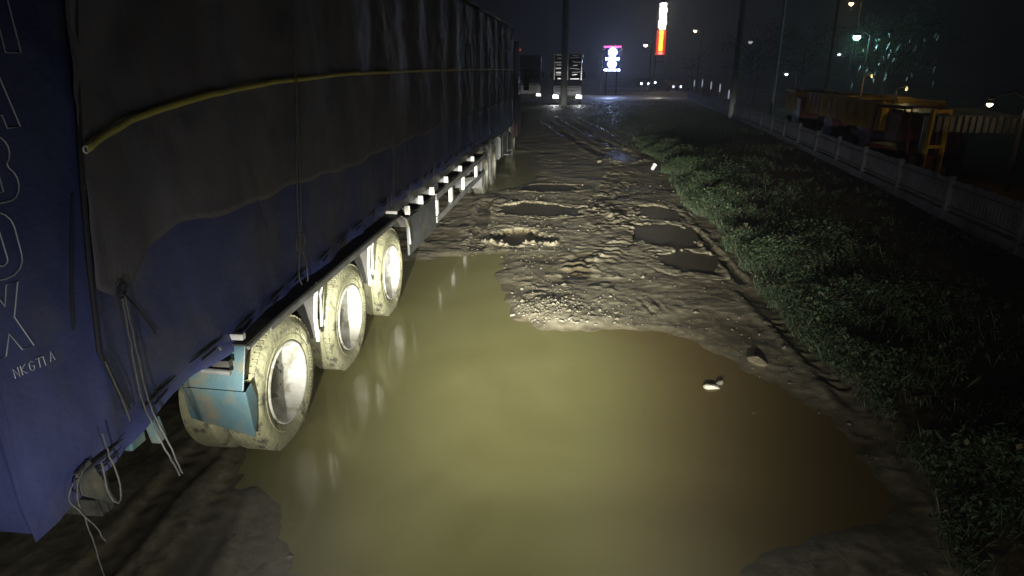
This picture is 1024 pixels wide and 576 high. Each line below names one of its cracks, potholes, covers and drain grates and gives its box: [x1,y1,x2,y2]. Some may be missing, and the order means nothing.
pothole [510,183,592,194]
pothole [487,200,595,219]
pothole [626,203,694,224]
pothole [476,225,565,248]
pothole [620,220,714,252]
pothole [644,246,737,281]
